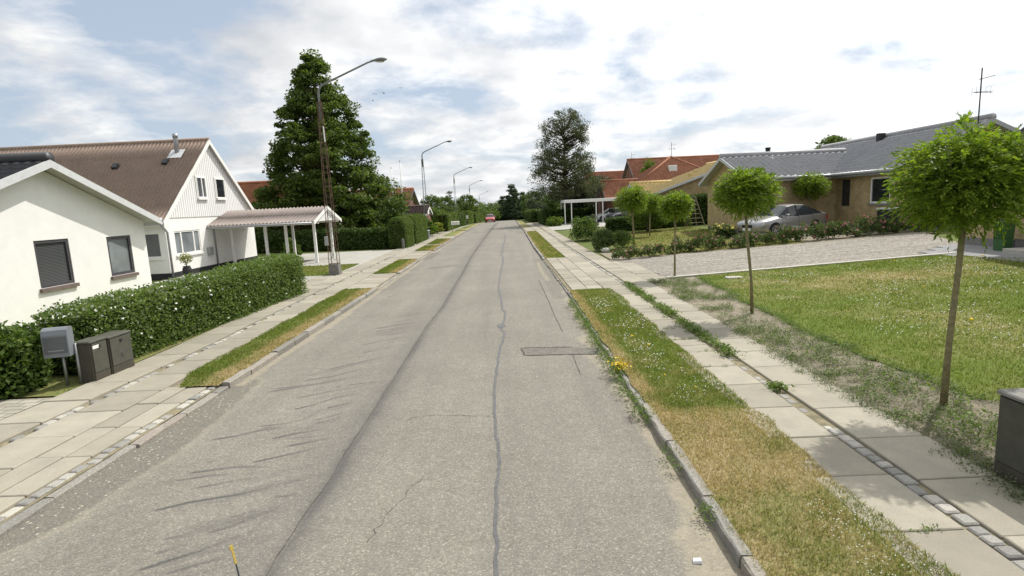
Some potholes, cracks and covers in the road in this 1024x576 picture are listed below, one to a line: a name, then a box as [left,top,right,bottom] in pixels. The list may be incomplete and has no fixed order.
crack [265,224,496,576]
